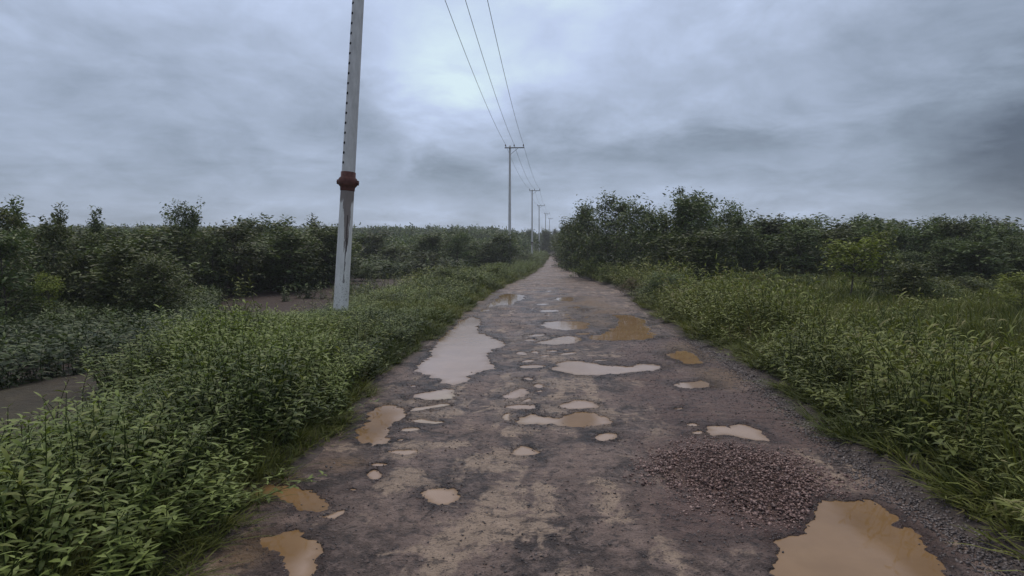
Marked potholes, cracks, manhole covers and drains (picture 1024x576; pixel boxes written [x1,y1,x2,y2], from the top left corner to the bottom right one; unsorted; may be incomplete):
pothole [550,360,662,375]
pothole [413,315,505,385]
pothole [539,321,591,330]
pothole [587,314,658,341]
pothole [250,482,333,512]
pothole [502,388,530,399]
pothole [593,432,618,441]
pothole [514,411,614,428]
pothole [559,399,600,409]
pothole [665,350,704,364]
pothole [673,380,710,389]
pothole [766,498,950,576]
